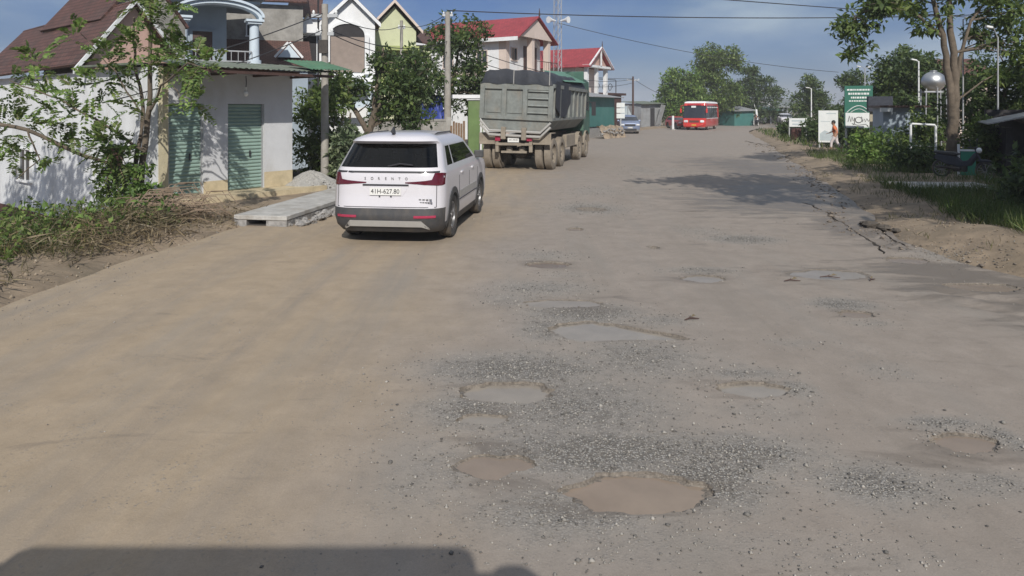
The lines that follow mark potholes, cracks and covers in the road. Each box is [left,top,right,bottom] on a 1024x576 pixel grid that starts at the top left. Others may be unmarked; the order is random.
pothole [455,413,509,425]
pothole [548,321,690,342]
pothole [785,269,871,280]
pothole [716,381,792,398]
pothole [451,454,537,481]
pothole [459,381,555,403]
pothole [557,471,715,515]
pothole [837,310,876,318]
crack [804,203,905,254]
pothole [929,432,1000,454]
pothole [680,275,726,283]
